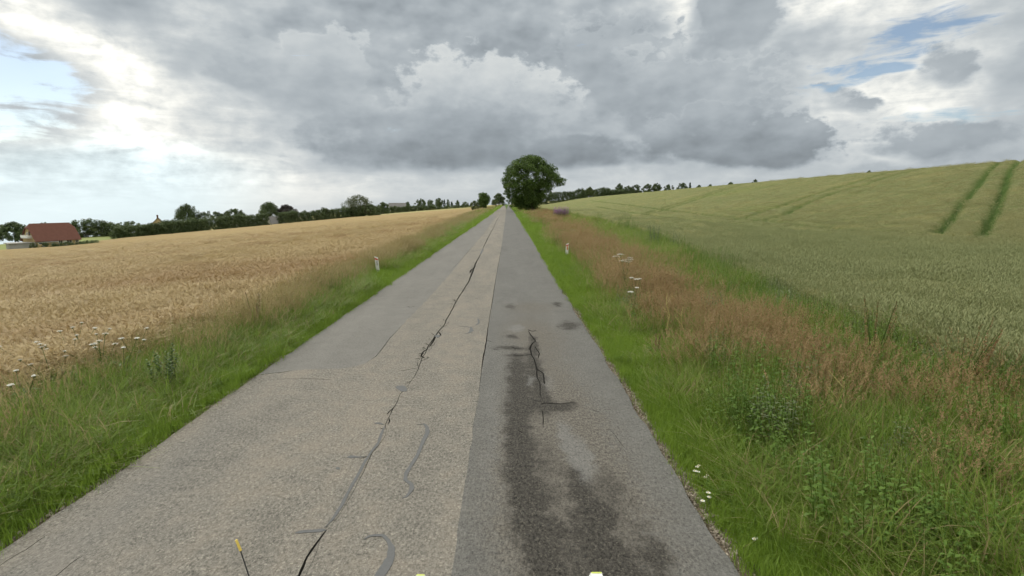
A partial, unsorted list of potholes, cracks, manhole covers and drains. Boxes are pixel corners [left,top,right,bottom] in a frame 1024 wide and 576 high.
crack [295,215,500,576]
crack [494,329,573,424]
